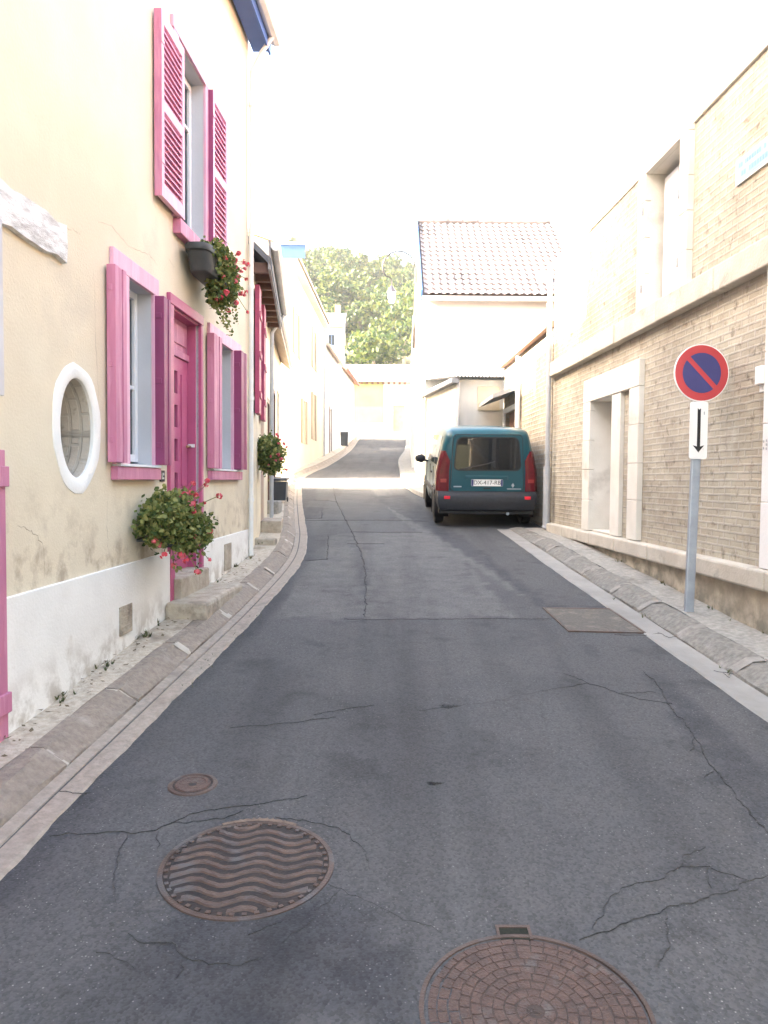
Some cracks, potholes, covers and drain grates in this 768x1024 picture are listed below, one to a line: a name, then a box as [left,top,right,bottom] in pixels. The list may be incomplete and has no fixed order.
crack [307,485,368,616]
crack [419,671,768,833]
manhole cover [542,607,646,634]
crack [230,705,373,728]
manhole cover [156,817,334,922]
manhole cover [419,925,657,1024]
crack [51,791,442,978]
manhole cover [167,773,218,797]
crack [579,847,768,963]
